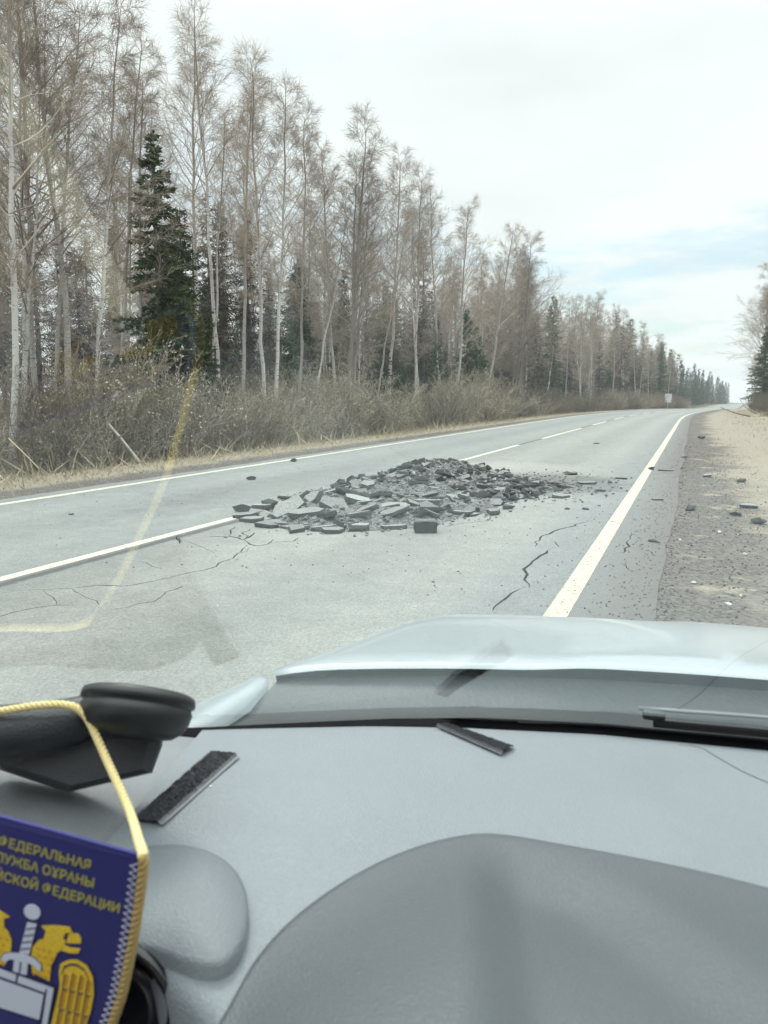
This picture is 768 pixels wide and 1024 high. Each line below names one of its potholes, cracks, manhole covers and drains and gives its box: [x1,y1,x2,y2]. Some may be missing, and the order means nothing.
crack [0,527,298,617]
crack [492,522,585,611]
